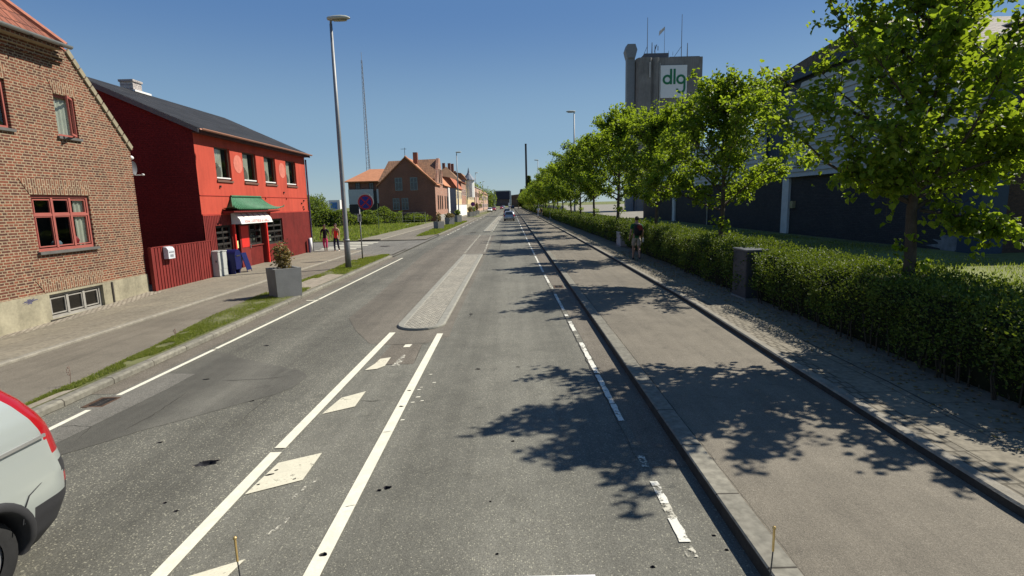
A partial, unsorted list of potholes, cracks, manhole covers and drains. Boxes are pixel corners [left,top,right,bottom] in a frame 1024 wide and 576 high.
pothole [193,459,222,467]
drain grate [80,397,121,408]
